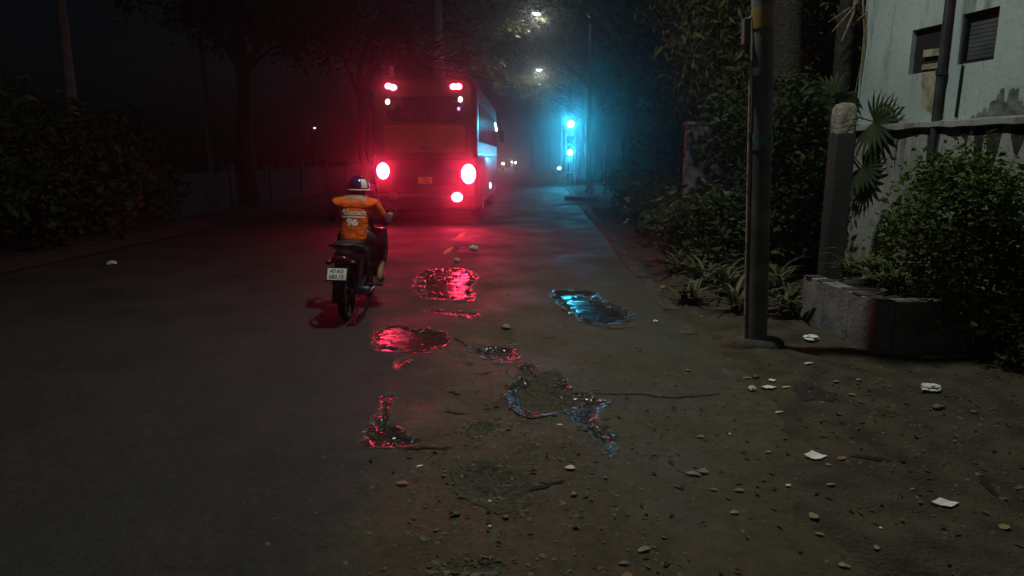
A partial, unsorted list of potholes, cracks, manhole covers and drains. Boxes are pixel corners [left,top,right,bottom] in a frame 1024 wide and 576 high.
pothole [468,345,522,364]
pothole [503,360,580,418]
pothole [367,324,456,354]
pothole [422,308,481,319]
pothole [549,377,620,458]
pothole [548,288,638,325]
pothole [411,268,481,302]
pothole [355,391,422,449]
